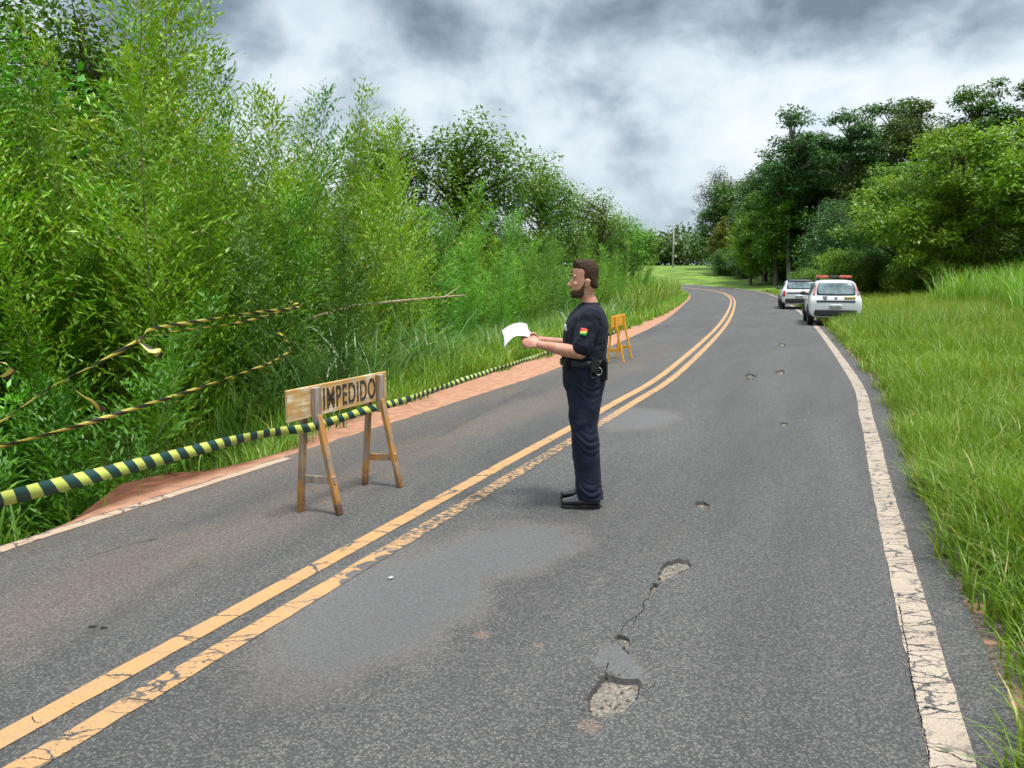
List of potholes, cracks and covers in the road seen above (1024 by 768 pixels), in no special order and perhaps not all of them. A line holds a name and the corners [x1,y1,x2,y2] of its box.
pothole [653,556,695,583]
crack [606,598,654,670]
pothole [615,630,632,648]
pothole [579,666,648,721]
